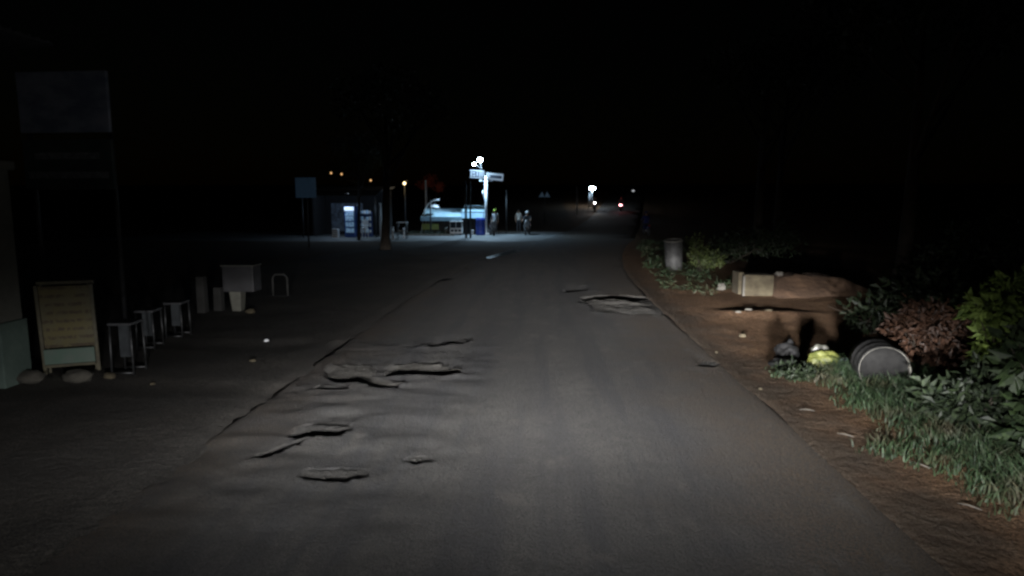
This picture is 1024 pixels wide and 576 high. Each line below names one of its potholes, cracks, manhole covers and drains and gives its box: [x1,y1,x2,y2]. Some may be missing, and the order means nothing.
pothole [385,363,461,376]
pothole [323,364,404,387]
pothole [290,424,351,438]
pothole [580,295,664,315]
pothole [299,469,368,481]
